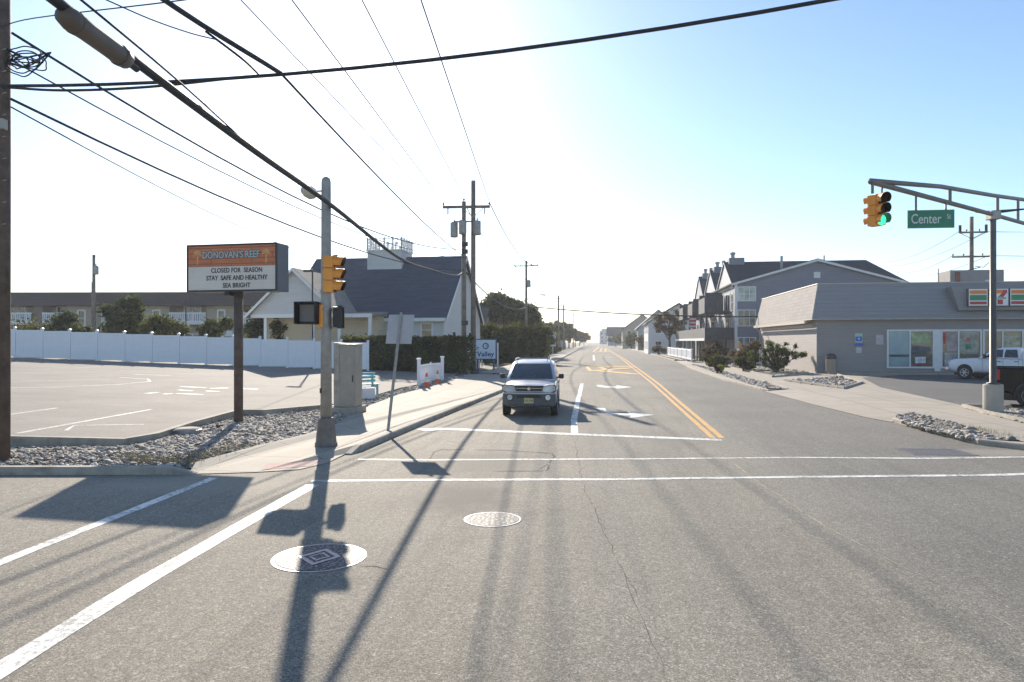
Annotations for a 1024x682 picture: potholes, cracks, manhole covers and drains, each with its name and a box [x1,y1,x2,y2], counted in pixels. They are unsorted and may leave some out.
crack [574,441,665,677]
manhole cover [271,544,367,573]
manhole cover [464,512,521,527]
